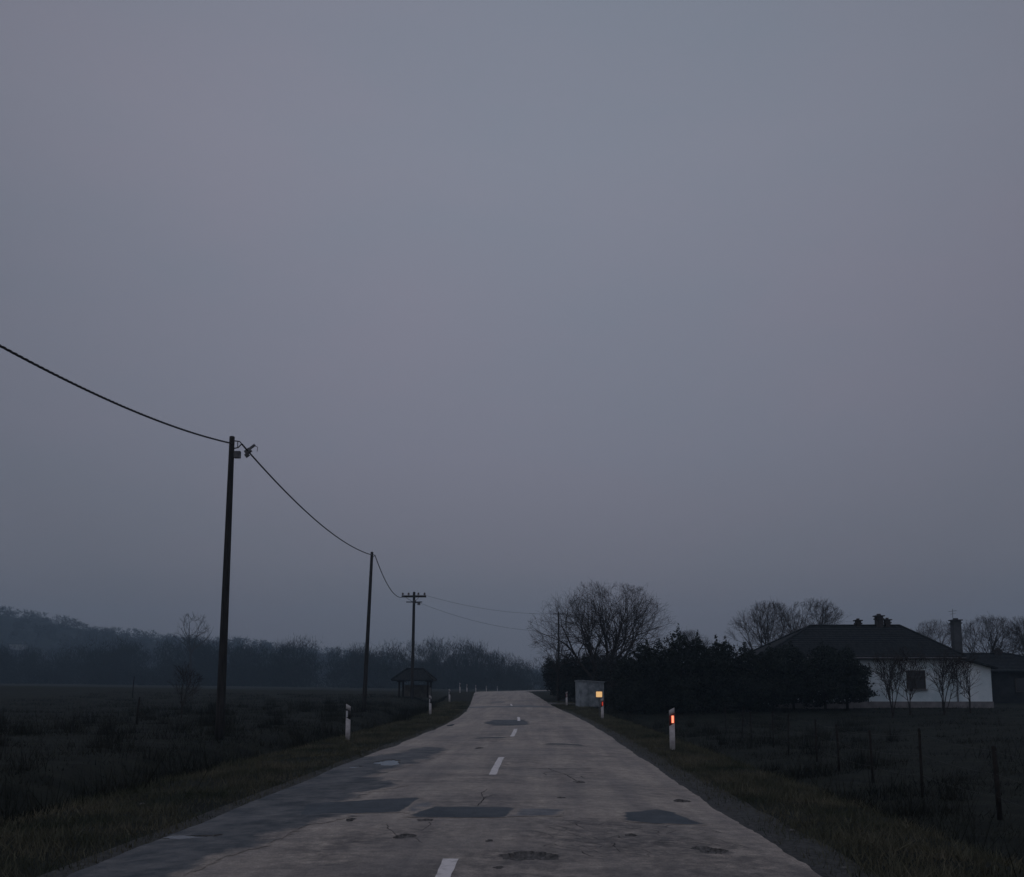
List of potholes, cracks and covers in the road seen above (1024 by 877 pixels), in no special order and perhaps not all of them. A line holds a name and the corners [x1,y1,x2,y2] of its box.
pothole [498,851,560,861]
pothole [690,846,729,854]
